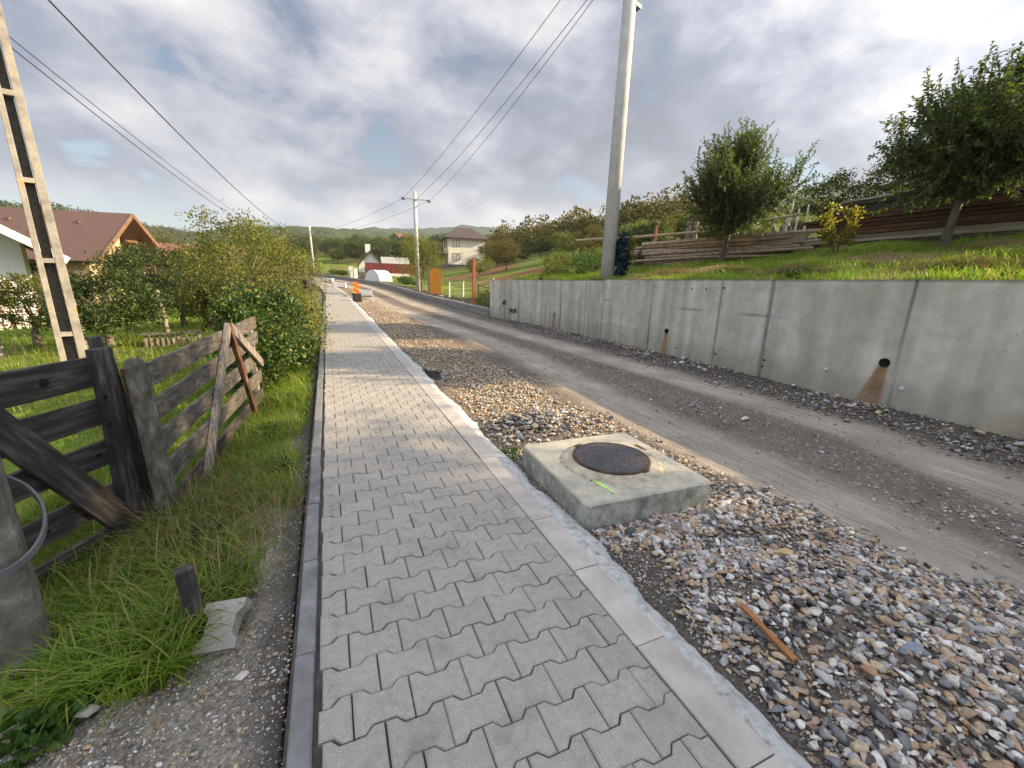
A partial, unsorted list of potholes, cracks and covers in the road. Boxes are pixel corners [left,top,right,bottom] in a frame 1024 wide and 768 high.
manhole cover [573,442,651,475]
pothole [422,369,445,380]
